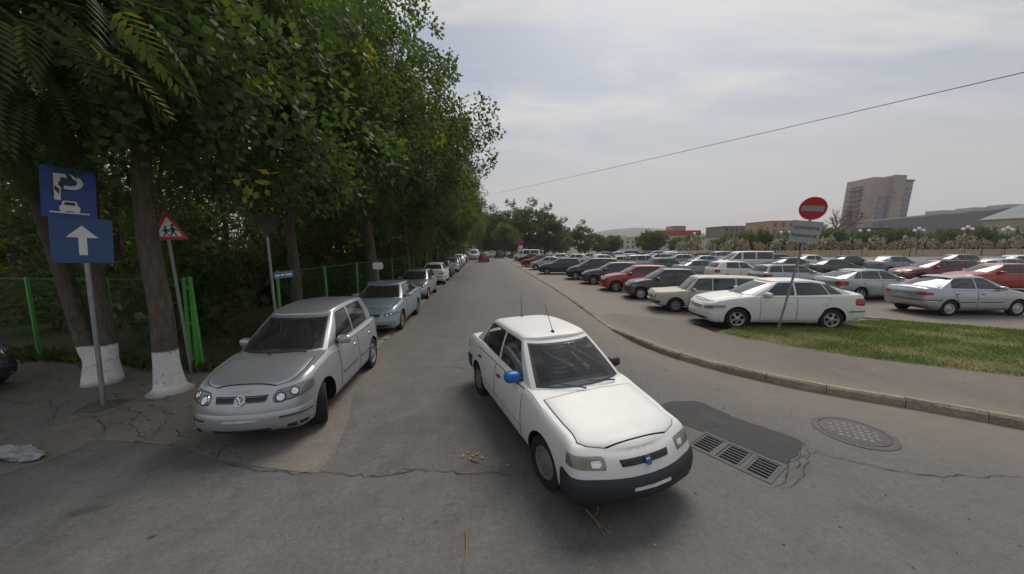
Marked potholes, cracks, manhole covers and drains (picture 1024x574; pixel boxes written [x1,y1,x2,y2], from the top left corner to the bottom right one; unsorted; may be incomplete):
crack [216,445,507,477]
crack [7,392,188,440]
manhole cover [811,416,902,451]
crack [752,443,1019,487]
drain grate [689,431,787,484]
